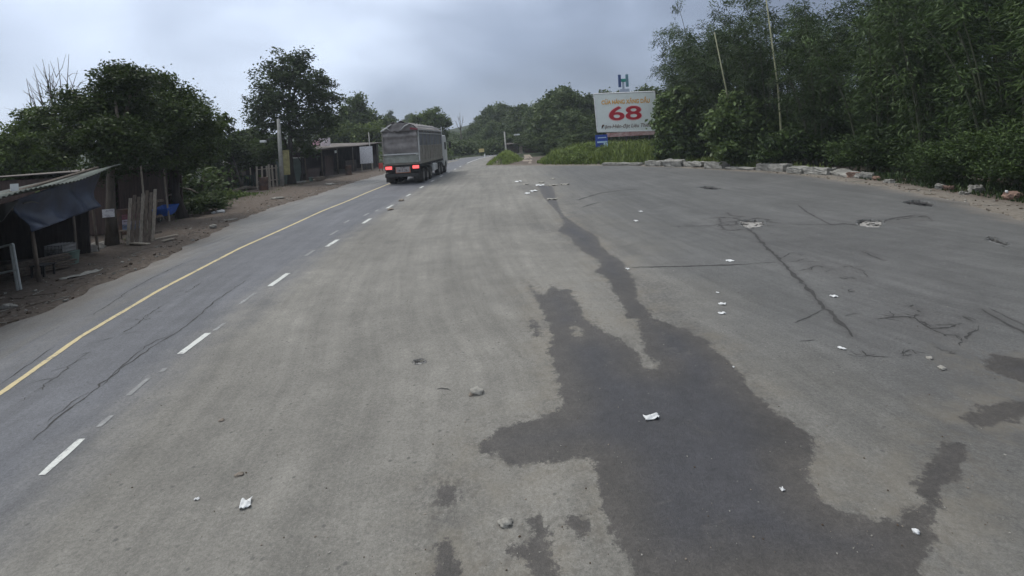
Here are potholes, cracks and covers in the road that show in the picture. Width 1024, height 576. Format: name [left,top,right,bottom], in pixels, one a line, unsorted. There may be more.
crack [635,205,1024,357]
pothole [738,219,767,229]
pothole [899,200,938,208]
pothole [984,236,1012,248]
crack [0,264,242,440]
pothole [855,219,885,228]
